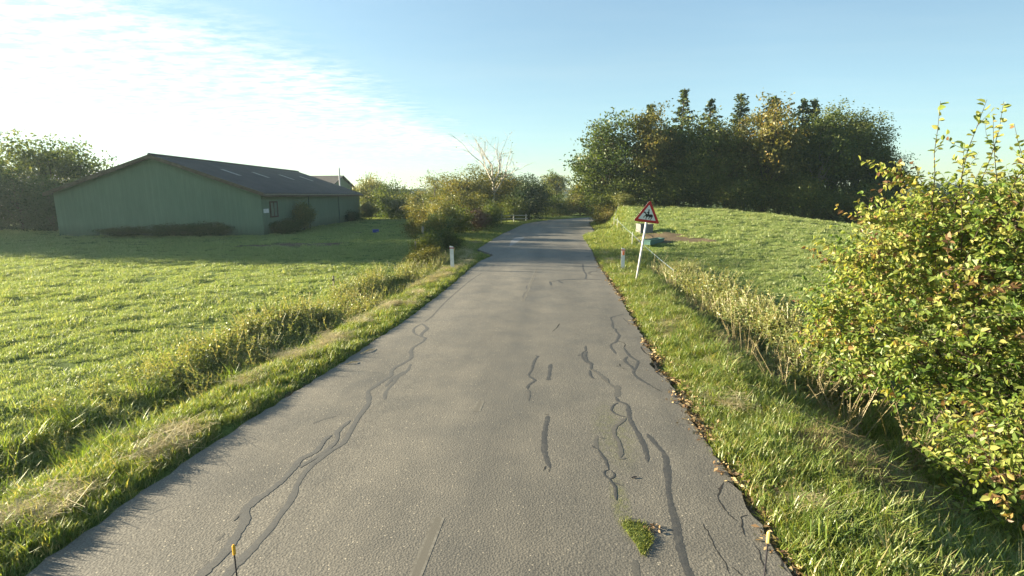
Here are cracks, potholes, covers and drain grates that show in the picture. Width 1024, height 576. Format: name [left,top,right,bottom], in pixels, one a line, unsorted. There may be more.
crack [703,480,789,575]
crack [592,435,622,500]
